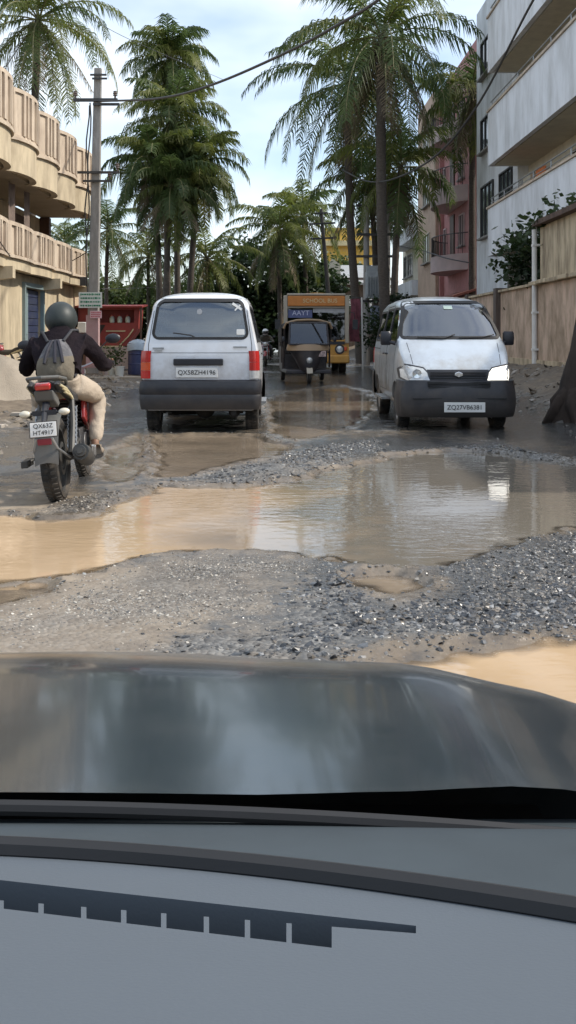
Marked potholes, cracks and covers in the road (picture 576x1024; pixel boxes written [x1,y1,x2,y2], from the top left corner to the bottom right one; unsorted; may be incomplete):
pothole [138,432,300,478]
pothole [0,447,576,591]
pothole [337,564,436,596]
